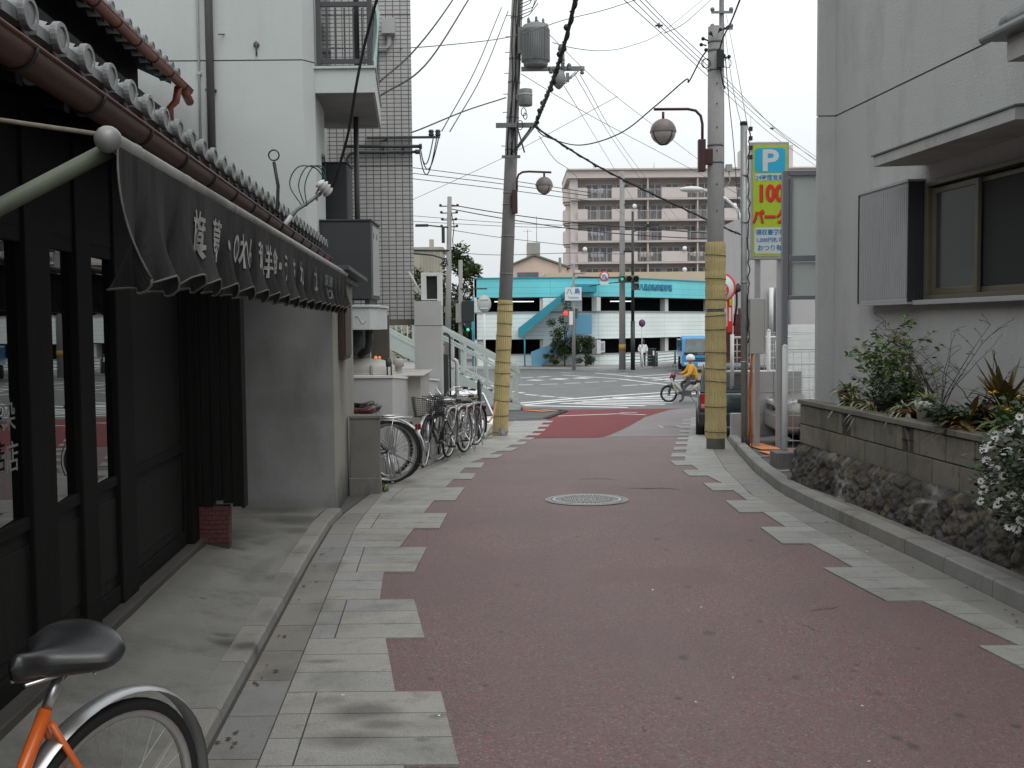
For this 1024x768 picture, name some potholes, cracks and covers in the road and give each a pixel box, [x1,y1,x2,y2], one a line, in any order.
manhole cover [545,494,629,506]
